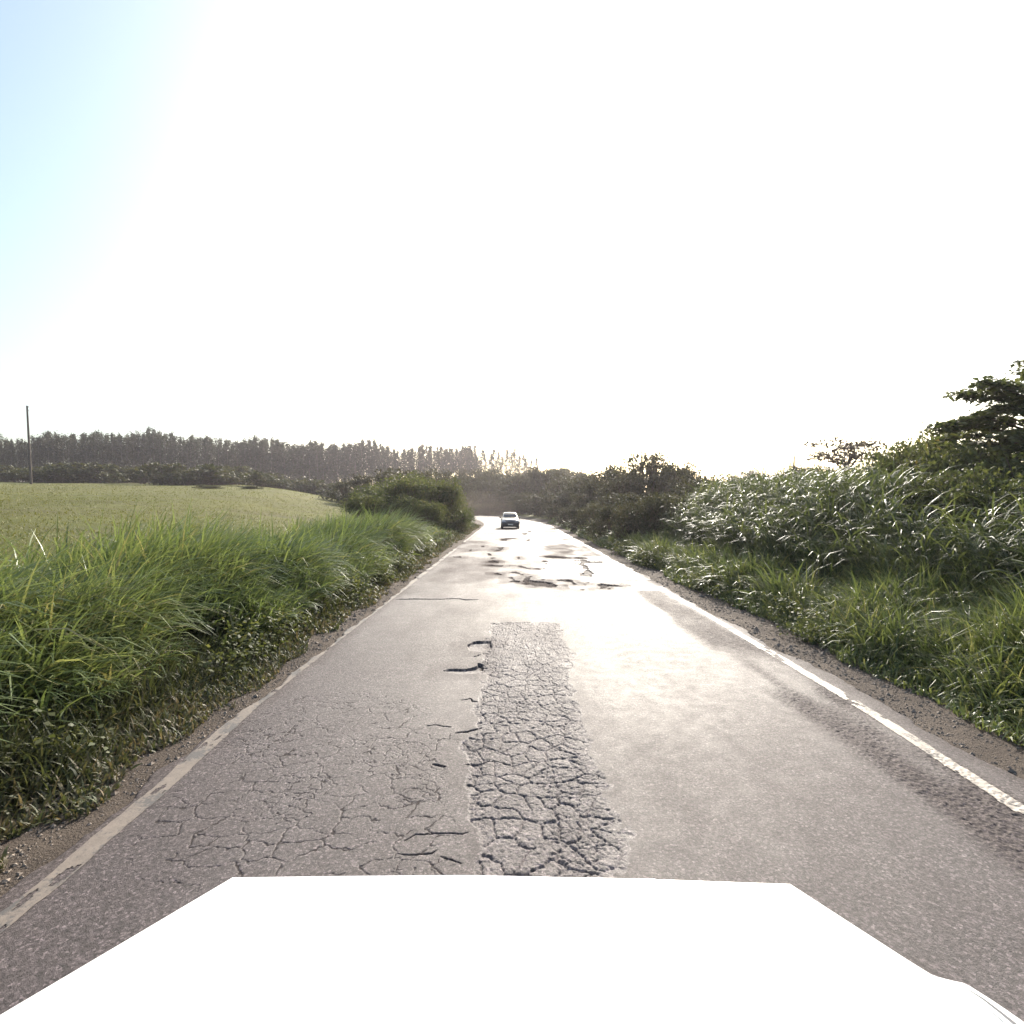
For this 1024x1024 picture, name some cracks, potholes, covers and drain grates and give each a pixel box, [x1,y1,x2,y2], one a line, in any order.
crack [127,622,637,884]
pothole [522,576,557,588]
pothole [467,641,487,653]
pothole [444,663,482,675]
